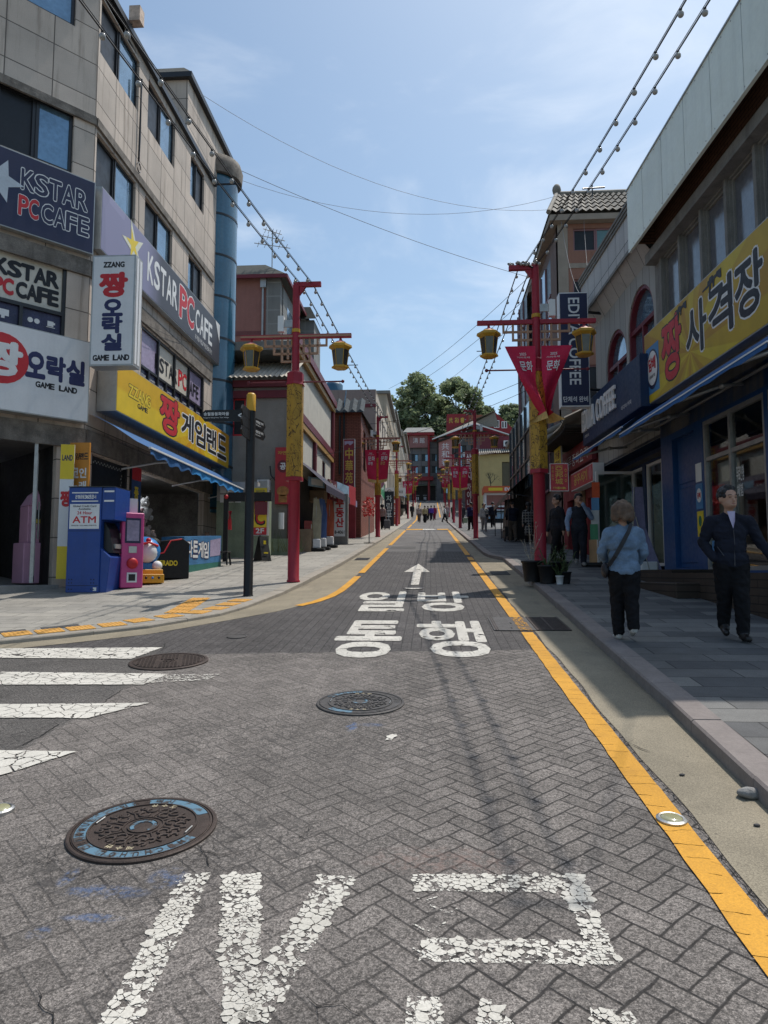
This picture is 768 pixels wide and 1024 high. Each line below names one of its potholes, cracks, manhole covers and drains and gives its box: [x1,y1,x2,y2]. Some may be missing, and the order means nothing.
manhole cover [65,797,217,865]
drain grate [526,617,572,631]
crack [15,987,62,1024]
manhole cover [316,690,404,716]
manhole cover [128,653,209,671]
